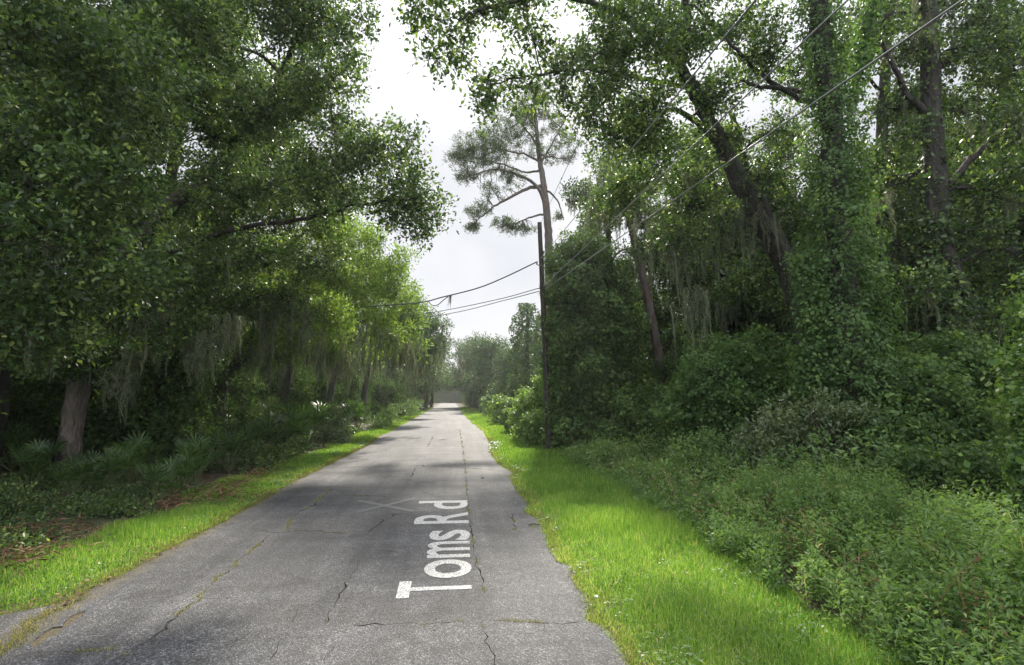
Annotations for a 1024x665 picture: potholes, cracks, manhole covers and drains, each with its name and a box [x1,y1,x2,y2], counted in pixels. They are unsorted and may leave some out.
crack [25,489,348,663]
crack [324,550,582,665]
